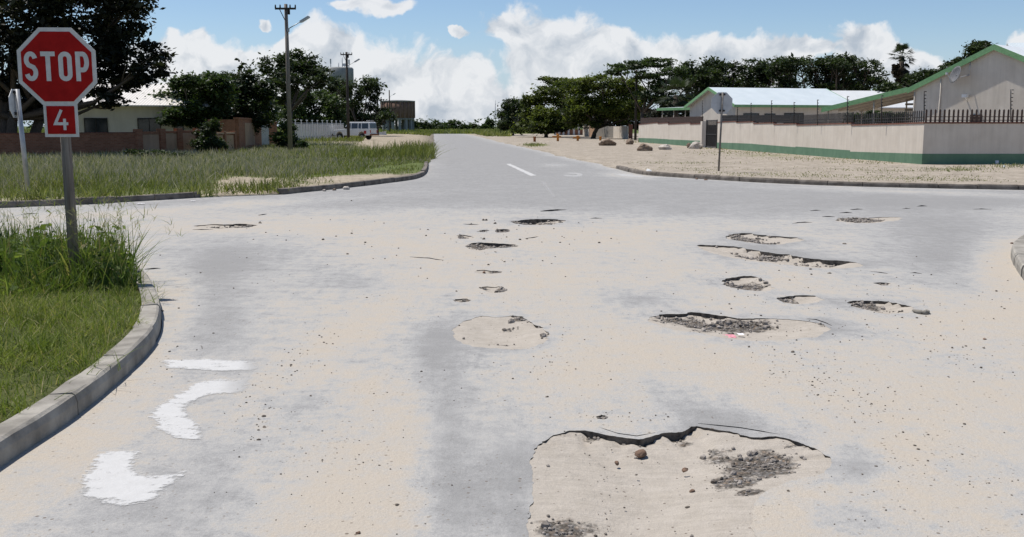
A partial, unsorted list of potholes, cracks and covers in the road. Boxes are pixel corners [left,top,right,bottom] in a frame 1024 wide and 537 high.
pothole [847,300,913,314]
pothole [451,315,550,350]
pothole [465,242,517,250]
pothole [722,276,775,291]
pothole [648,312,831,341]
pothole [526,426,832,537]
pothole [726,233,803,245]
pothole [698,245,863,269]
pothole [777,295,824,304]
